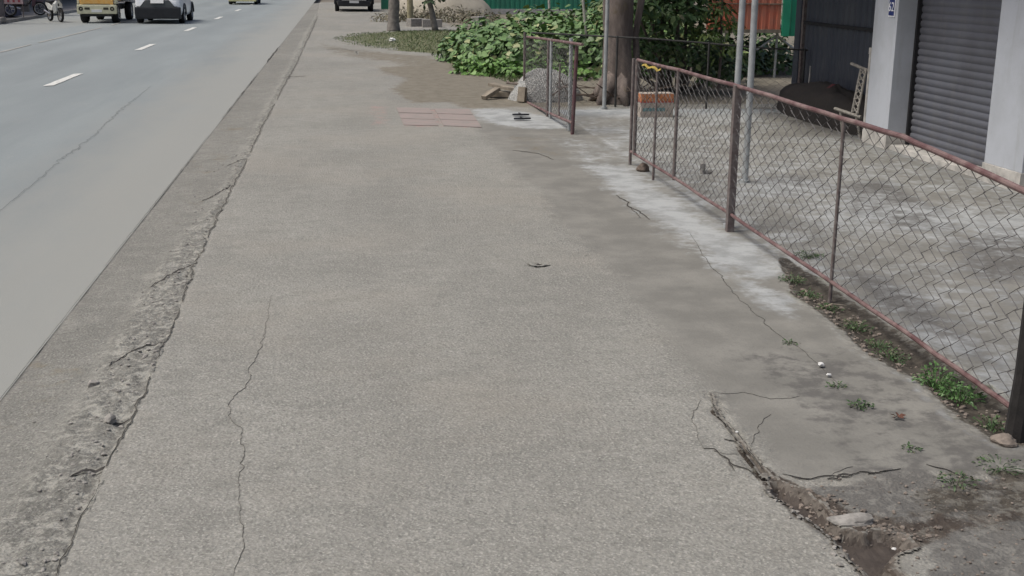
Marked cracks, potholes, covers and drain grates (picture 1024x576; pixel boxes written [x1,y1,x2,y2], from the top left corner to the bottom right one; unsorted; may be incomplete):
crack [783,467,901,481]
crack [228,296,272,576]
crack [616,195,649,219]
pothole [760,473,921,576]
crack [691,392,799,474]
crack [0,48,278,399]
crack [70,465,108,476]
